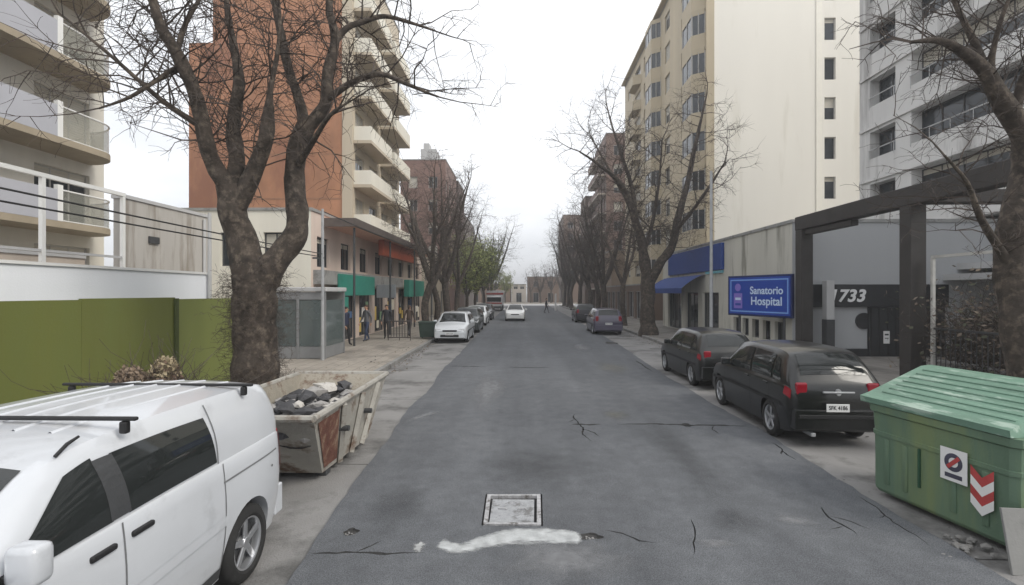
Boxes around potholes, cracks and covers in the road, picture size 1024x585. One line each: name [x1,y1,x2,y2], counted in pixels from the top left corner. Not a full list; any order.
manhole cover [483,494,541,526]
crack [312,542,421,555]
crack [569,414,597,441]
crack [821,496,924,541]
crack [646,423,732,434]
